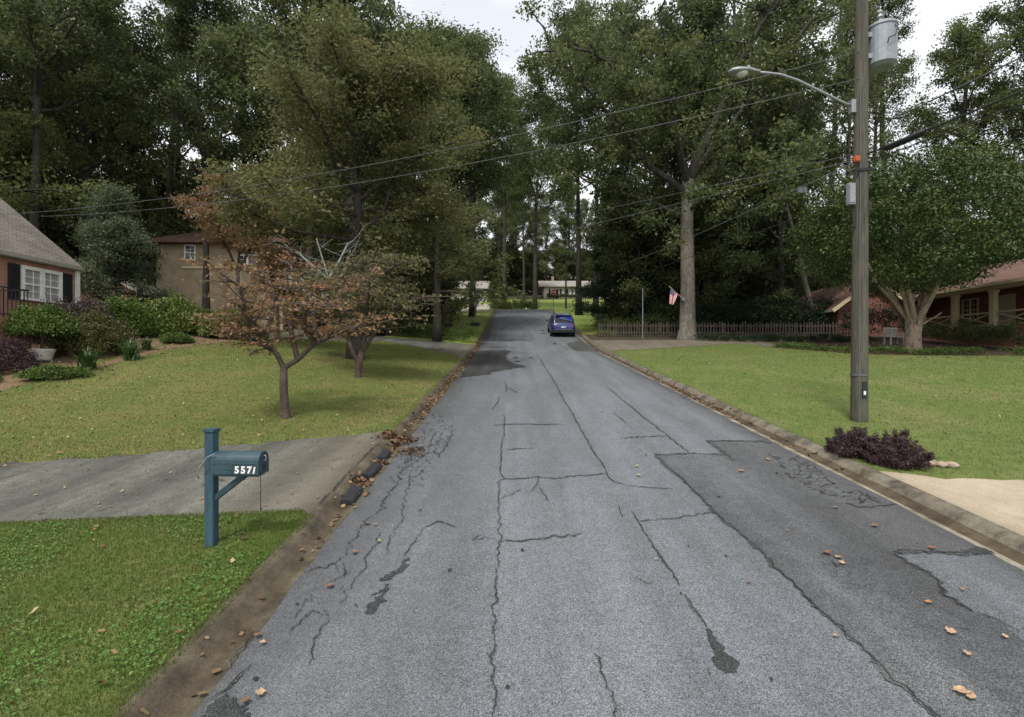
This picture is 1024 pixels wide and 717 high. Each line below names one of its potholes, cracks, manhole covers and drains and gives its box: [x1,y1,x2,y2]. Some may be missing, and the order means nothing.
crack [765,455,891,508]
crack [288,355,672,717]
crack [618,505,713,626]
